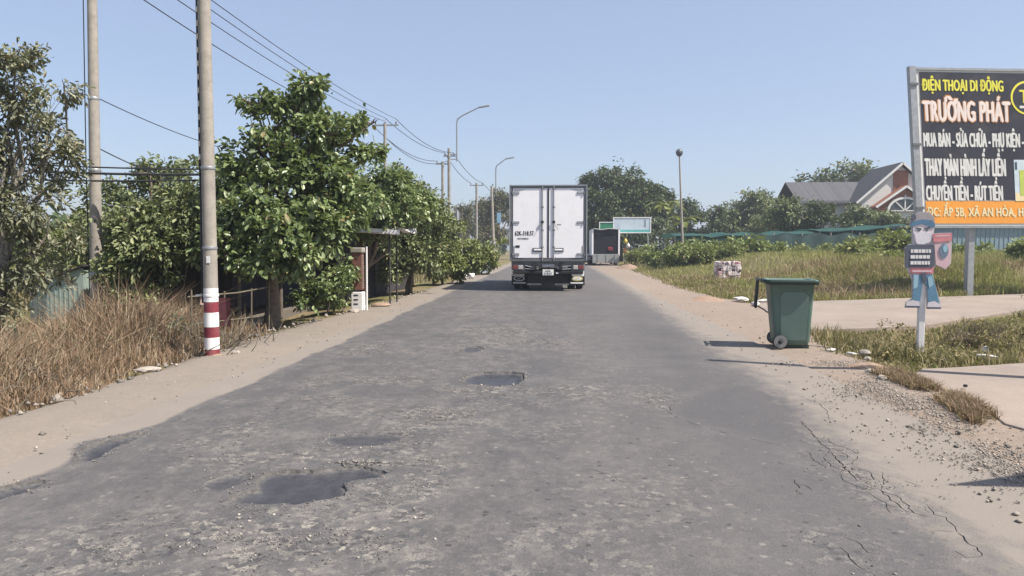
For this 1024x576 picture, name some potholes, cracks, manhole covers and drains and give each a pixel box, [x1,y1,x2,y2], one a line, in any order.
crack [832,537,876,570]
pothole [464,372,525,386]
crack [802,397,983,558]
pothole [203,473,251,491]
pothole [228,466,387,505]
pothole [324,432,408,446]
pothole [77,431,148,462]
